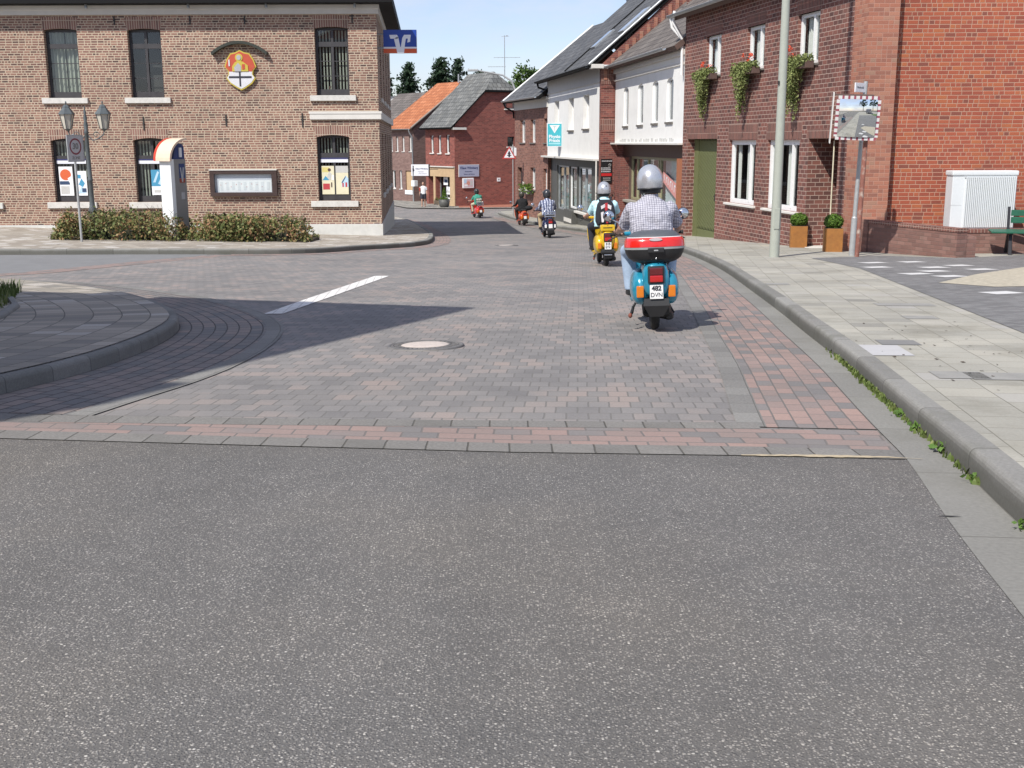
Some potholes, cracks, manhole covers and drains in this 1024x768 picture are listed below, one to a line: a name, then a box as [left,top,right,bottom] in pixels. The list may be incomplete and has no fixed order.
manhole cover [386,340,464,351]
